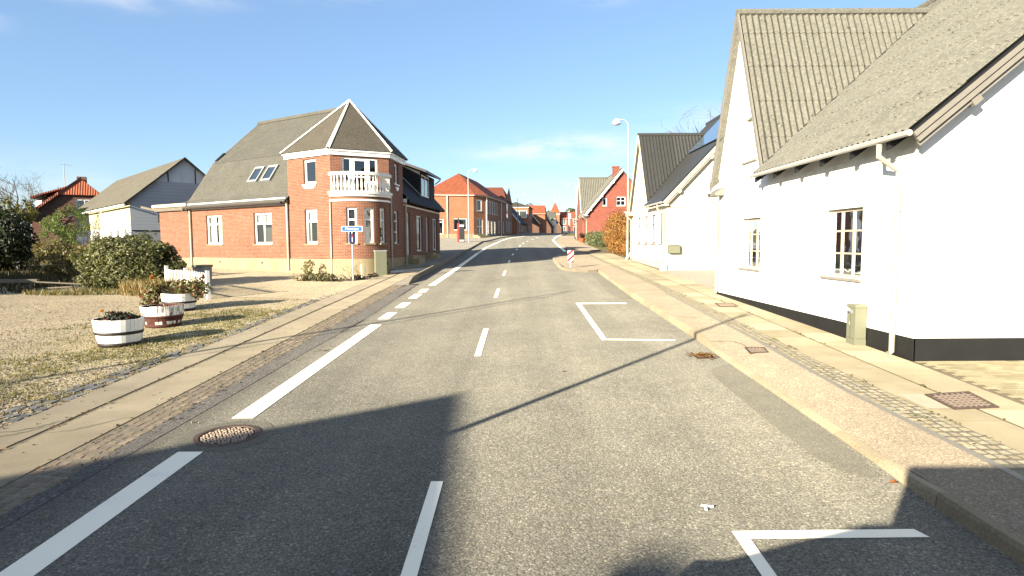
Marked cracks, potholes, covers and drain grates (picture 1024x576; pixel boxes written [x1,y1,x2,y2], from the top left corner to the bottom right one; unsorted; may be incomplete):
manhole cover [192,425,261,447]
